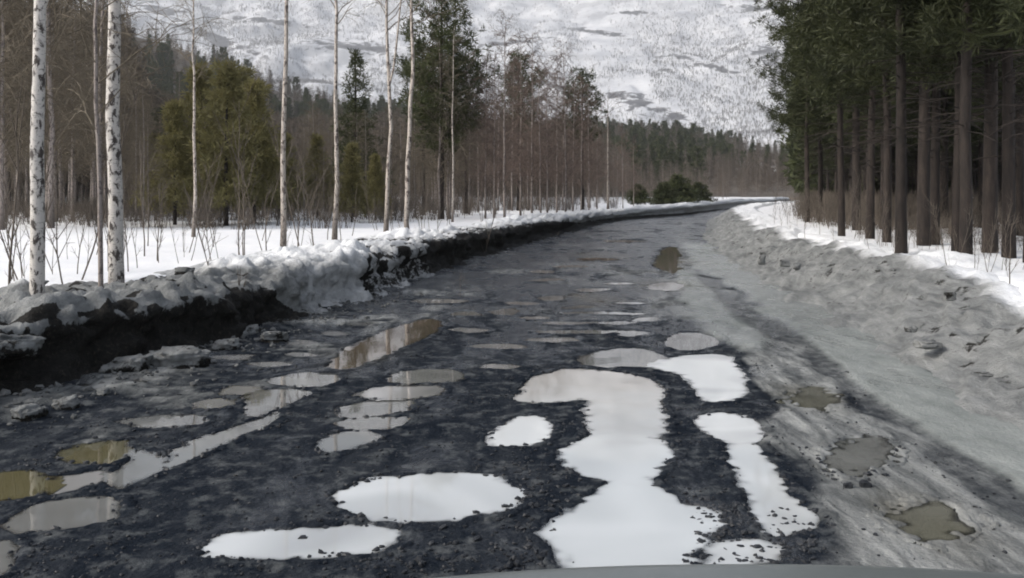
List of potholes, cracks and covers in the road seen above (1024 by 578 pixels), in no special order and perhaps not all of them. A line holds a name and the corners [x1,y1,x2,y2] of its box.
pothole [233,386,323,419]
pothole [546,432,688,485]
pothole [770,384,857,414]
pothole [37,467,126,499]
pothole [0,464,67,506]
pothole [804,432,916,481]
pothole [524,475,740,569]
pothole [301,428,393,457]
pothole [571,391,682,443]
pothole [648,247,691,274]
pothole [97,446,177,493]
pothole [180,516,417,570]
